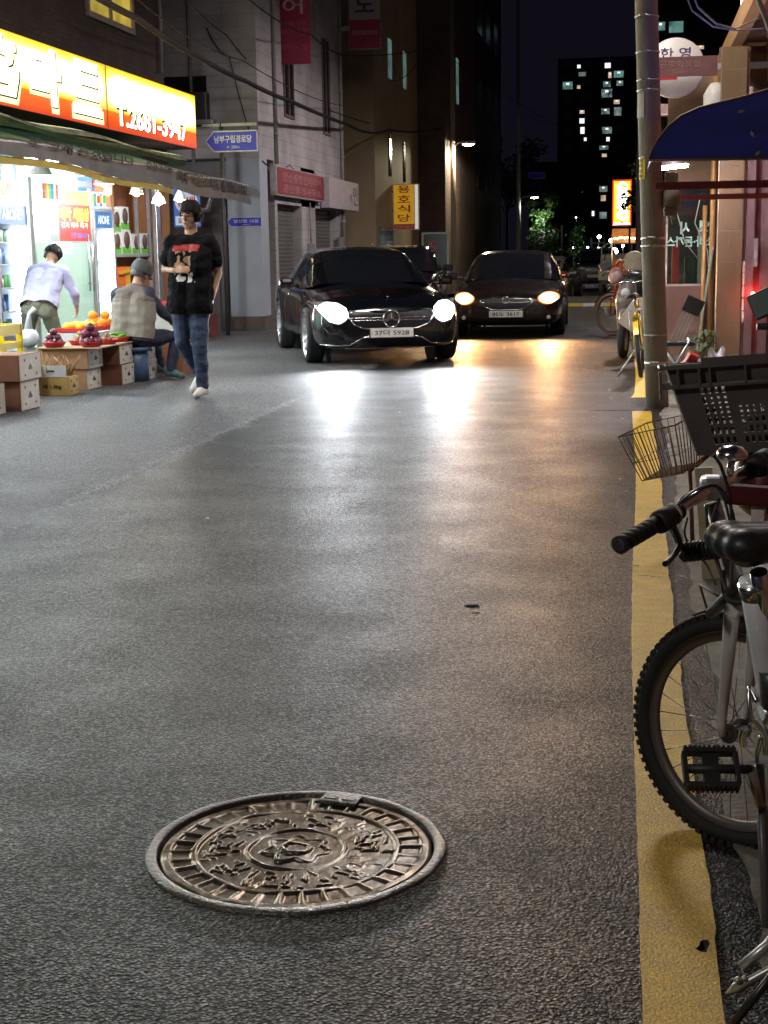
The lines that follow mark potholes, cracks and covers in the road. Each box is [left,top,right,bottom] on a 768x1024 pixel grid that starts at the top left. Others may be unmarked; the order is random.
manhole cover [144,791,448,916]
pothole [695,940,710,952]
